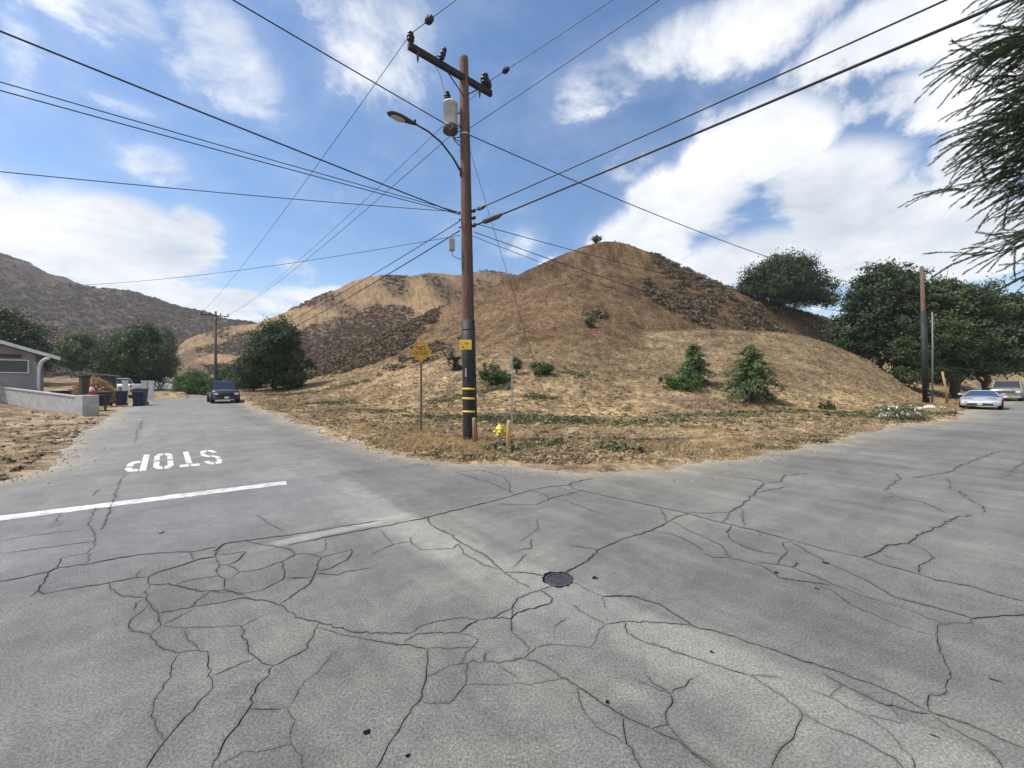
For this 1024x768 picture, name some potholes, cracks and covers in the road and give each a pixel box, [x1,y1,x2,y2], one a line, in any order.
manhole cover [542,571,574,588]
crack [0,452,1024,768]
